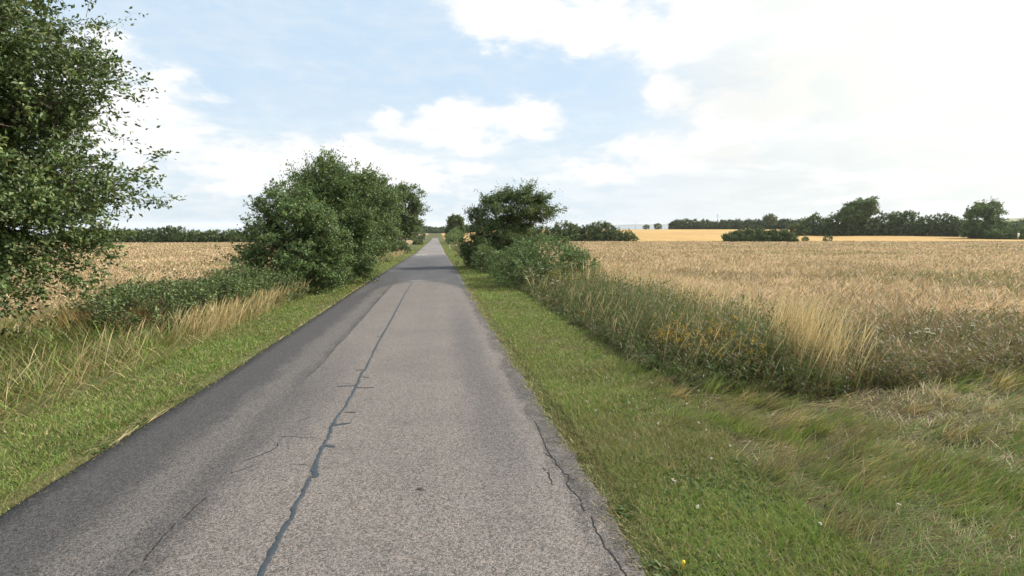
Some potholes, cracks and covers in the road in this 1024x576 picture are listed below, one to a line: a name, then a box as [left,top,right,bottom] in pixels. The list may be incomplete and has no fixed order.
crack [128,497,207,576]
crack [534,421,627,576]
